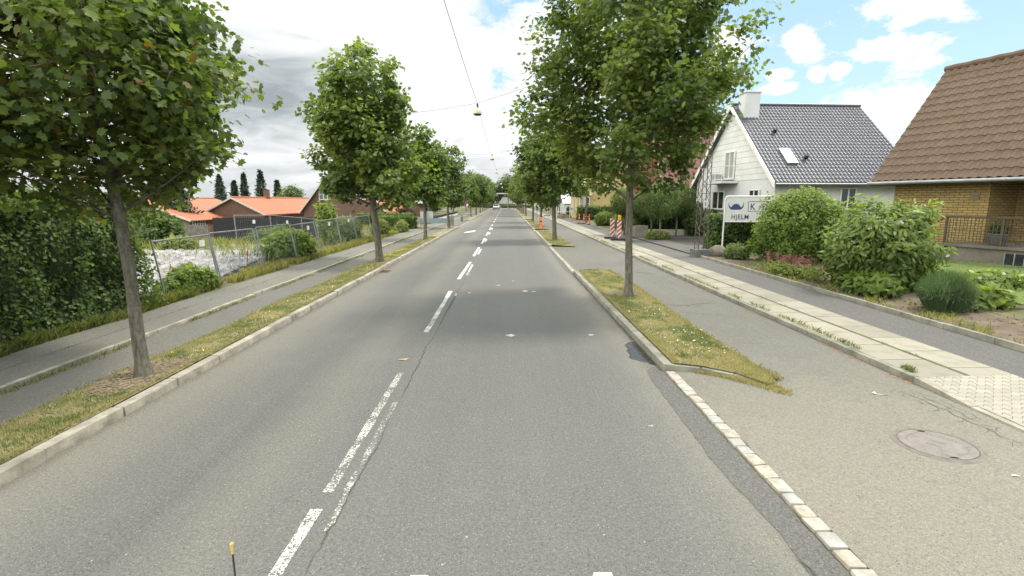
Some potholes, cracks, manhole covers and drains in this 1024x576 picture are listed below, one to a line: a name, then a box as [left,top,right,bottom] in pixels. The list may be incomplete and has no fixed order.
manhole cover [890,428,988,464]
crack [400,281,464,399]
crack [890,390,1024,447]
